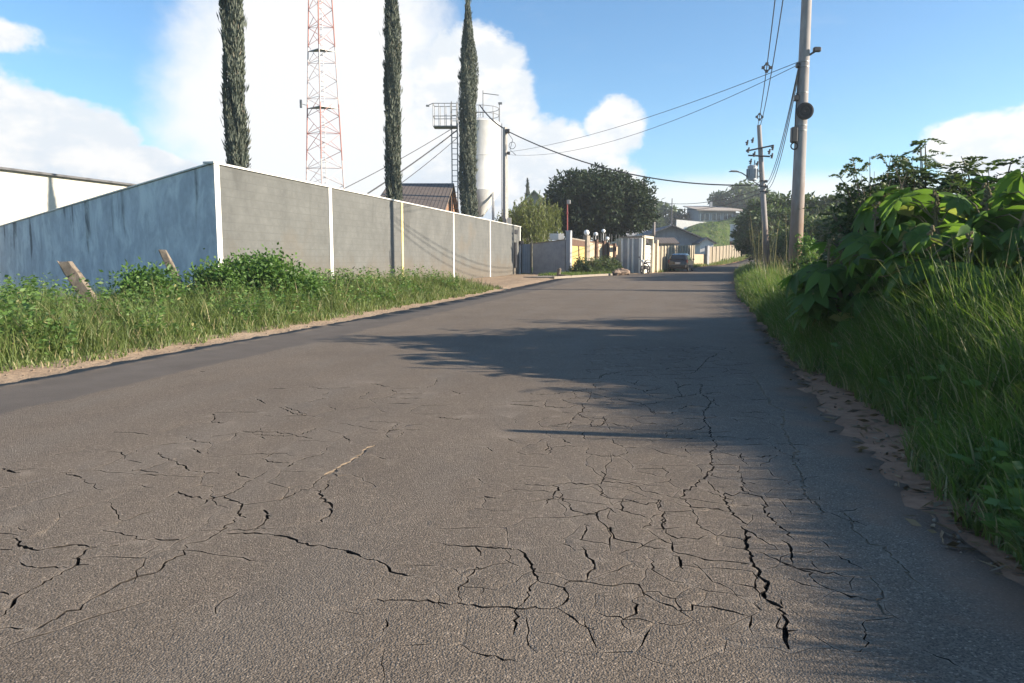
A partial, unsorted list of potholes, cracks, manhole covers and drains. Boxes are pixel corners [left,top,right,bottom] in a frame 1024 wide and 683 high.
crack [511,346,825,516]
crack [0,378,460,649]
crack [335,409,962,683]
